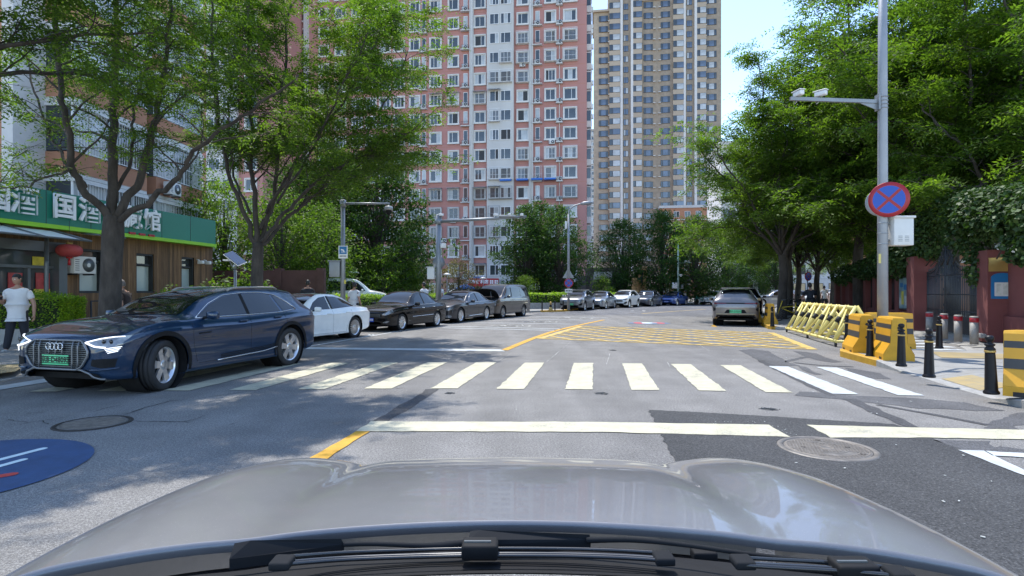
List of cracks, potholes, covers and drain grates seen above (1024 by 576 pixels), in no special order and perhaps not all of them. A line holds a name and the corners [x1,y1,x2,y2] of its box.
manhole cover [777,436,881,462]
manhole cover [50,415,134,432]
